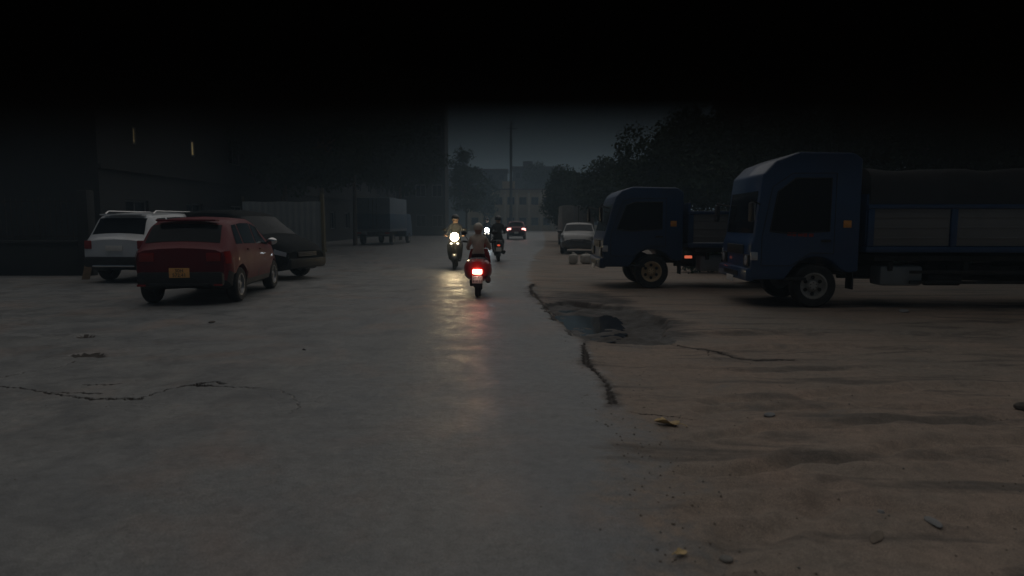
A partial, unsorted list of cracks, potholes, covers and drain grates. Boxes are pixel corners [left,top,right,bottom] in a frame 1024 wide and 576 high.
crack [520,283,550,306]
pothole [531,299,694,348]
crack [568,339,810,428]
crack [0,357,320,420]
